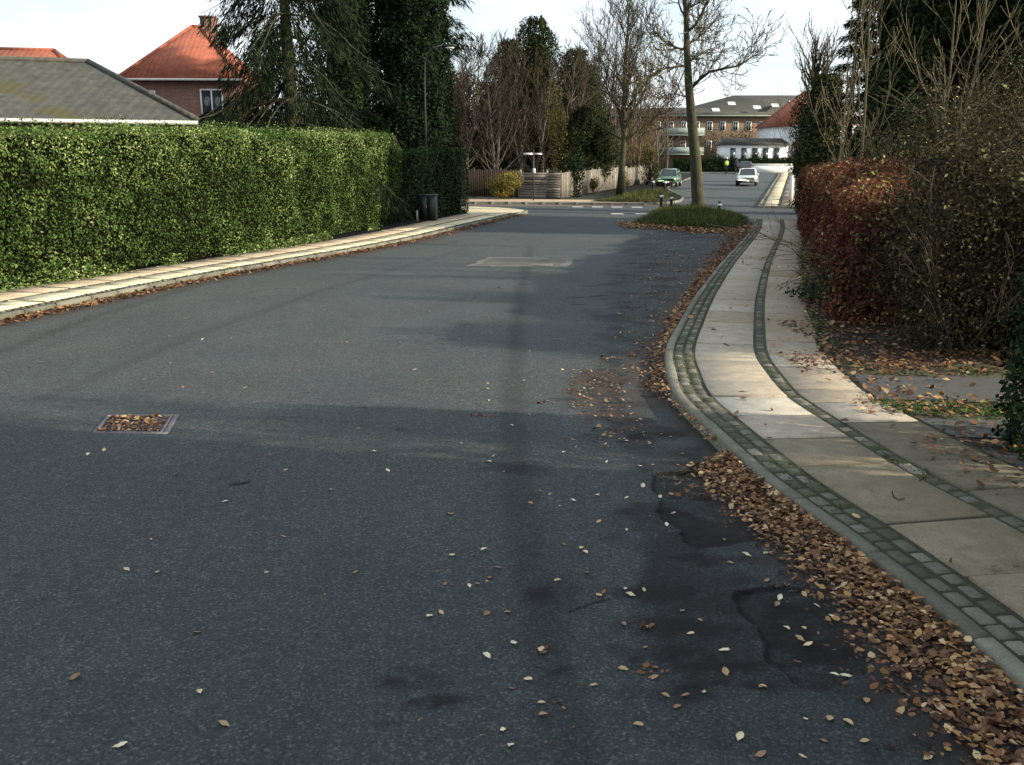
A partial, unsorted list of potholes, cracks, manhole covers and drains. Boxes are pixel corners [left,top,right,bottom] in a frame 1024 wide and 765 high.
pothole [636,460,809,555]
pothole [710,577,892,702]
